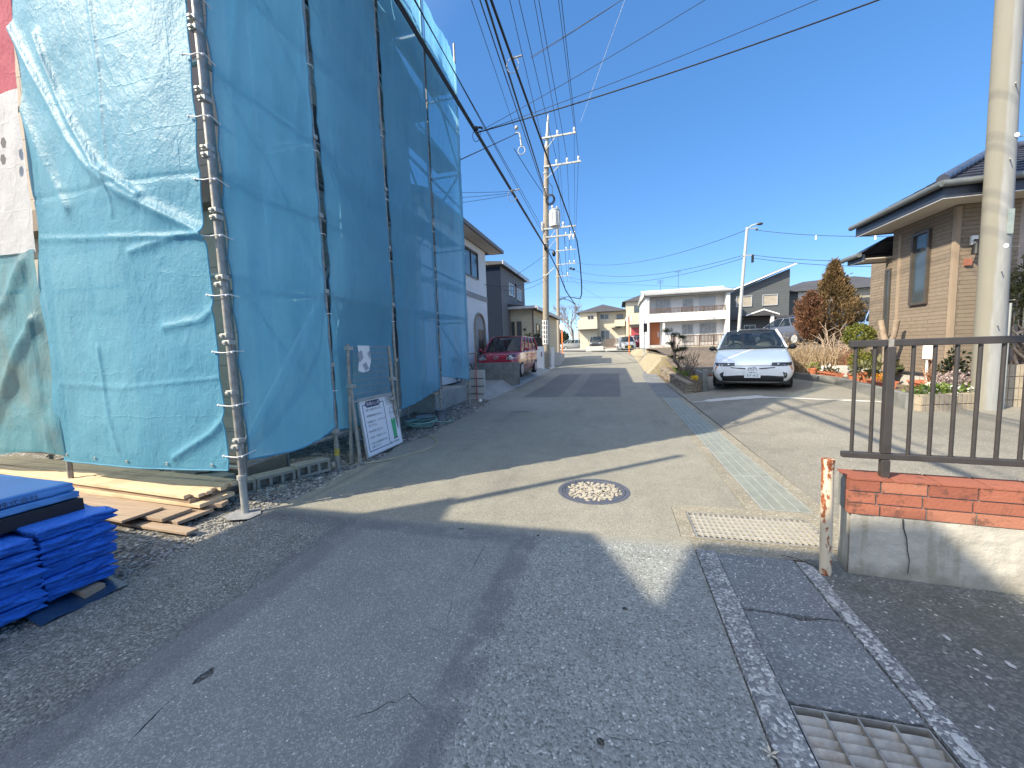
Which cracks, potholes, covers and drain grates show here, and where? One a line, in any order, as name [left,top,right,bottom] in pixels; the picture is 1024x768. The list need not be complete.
crack [344,693,427,721]
manhole cover [558,479,630,505]
crack [130,700,171,741]
pothole [192,667,216,684]
drain grate [686,512,838,549]
drain grate [790,705,960,768]
